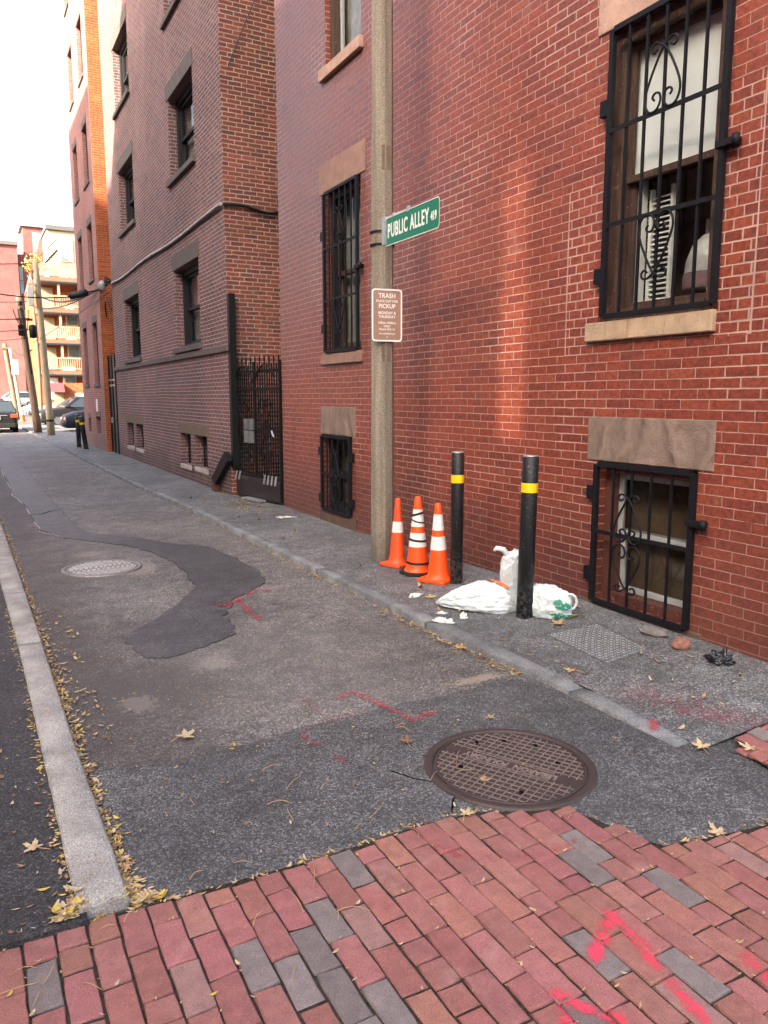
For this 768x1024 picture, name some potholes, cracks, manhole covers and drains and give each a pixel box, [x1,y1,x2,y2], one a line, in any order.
crack [390,770,455,812]
manhole cover [424,728,598,811]
manhole cover [61,559,142,577]
